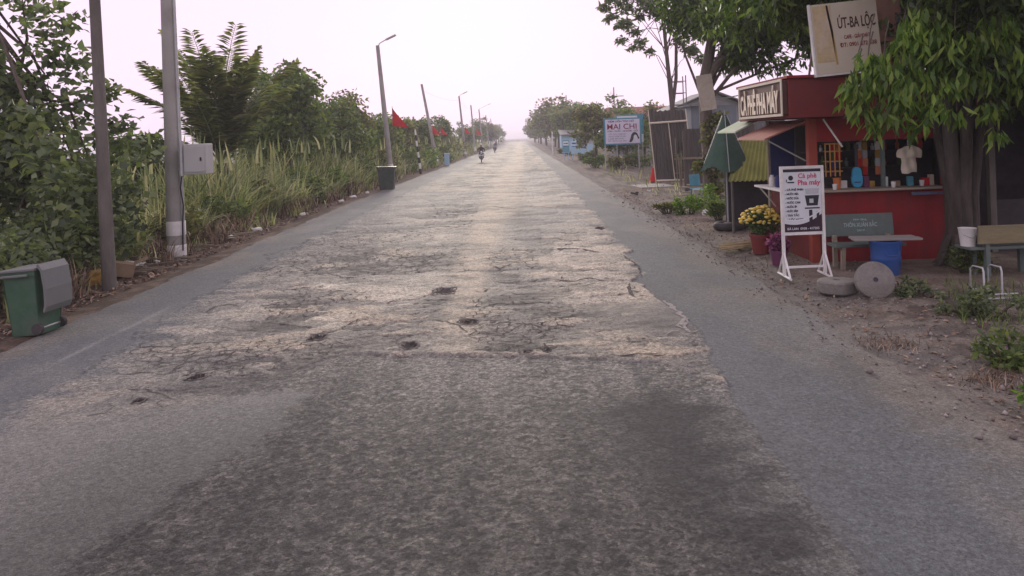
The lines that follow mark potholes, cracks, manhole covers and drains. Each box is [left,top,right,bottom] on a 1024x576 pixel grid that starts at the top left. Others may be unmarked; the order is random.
crack [91,318,370,415]
pothole [432,286,457,295]
pothole [183,372,208,381]
pothole [398,341,420,350]
crack [206,203,645,378]
pothole [306,333,328,341]
crack [609,300,698,356]
